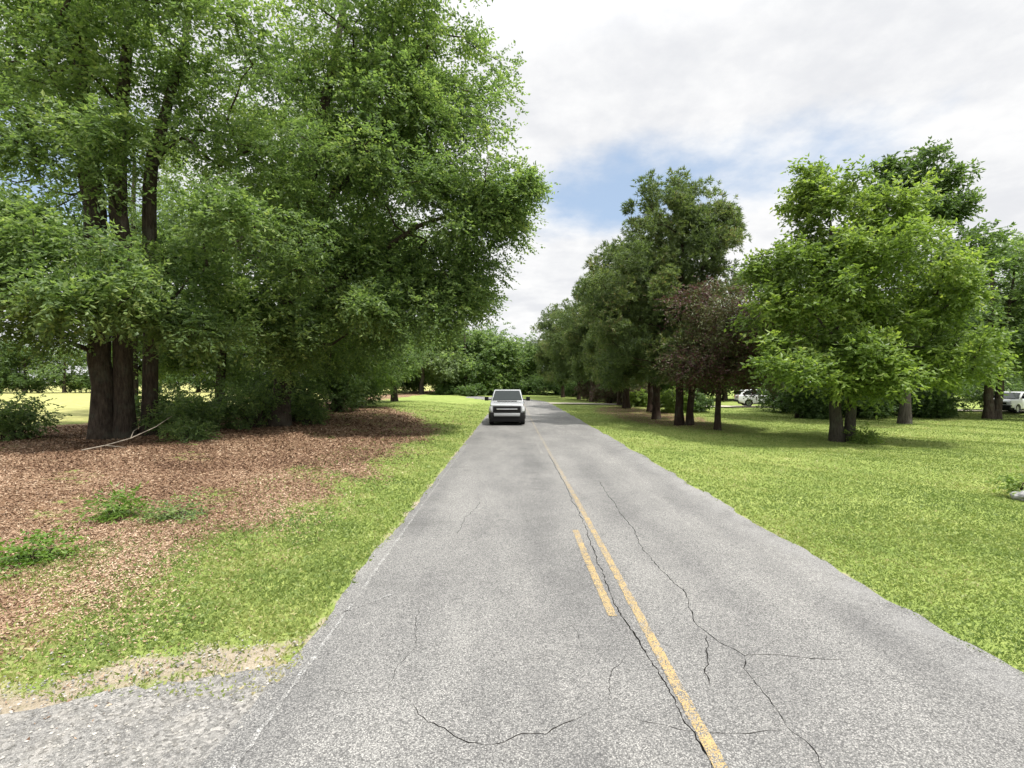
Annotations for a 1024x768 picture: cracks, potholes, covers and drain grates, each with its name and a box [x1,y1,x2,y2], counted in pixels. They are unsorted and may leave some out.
crack [413,704,589,745]
crack [549,456,846,768]
